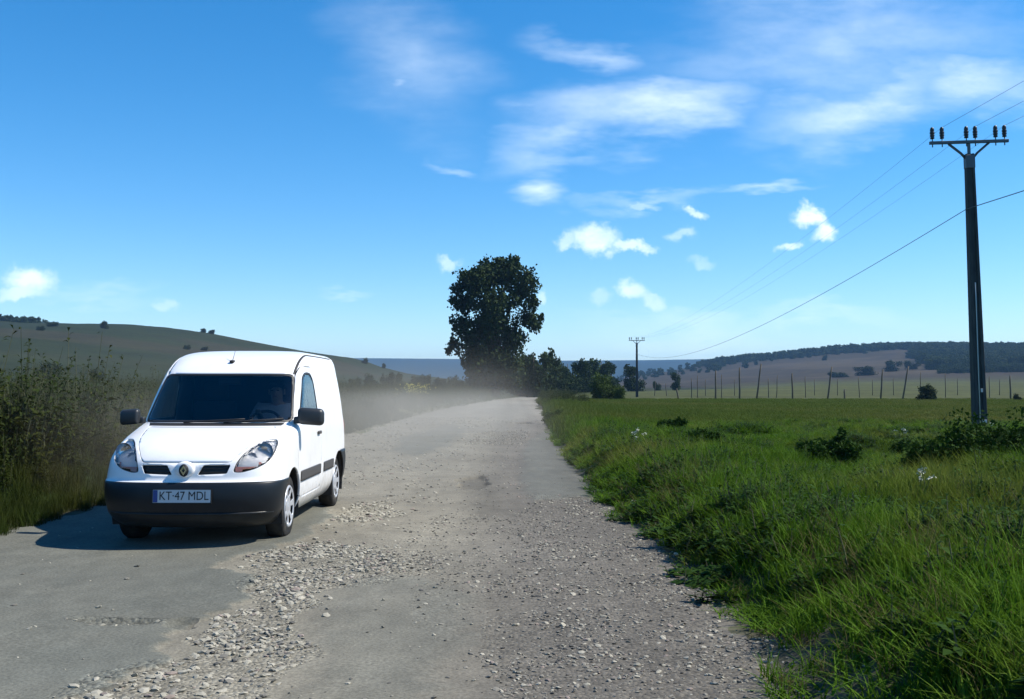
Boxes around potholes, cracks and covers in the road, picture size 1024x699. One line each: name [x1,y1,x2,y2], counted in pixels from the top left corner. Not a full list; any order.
pothole [67,616,171,626]
